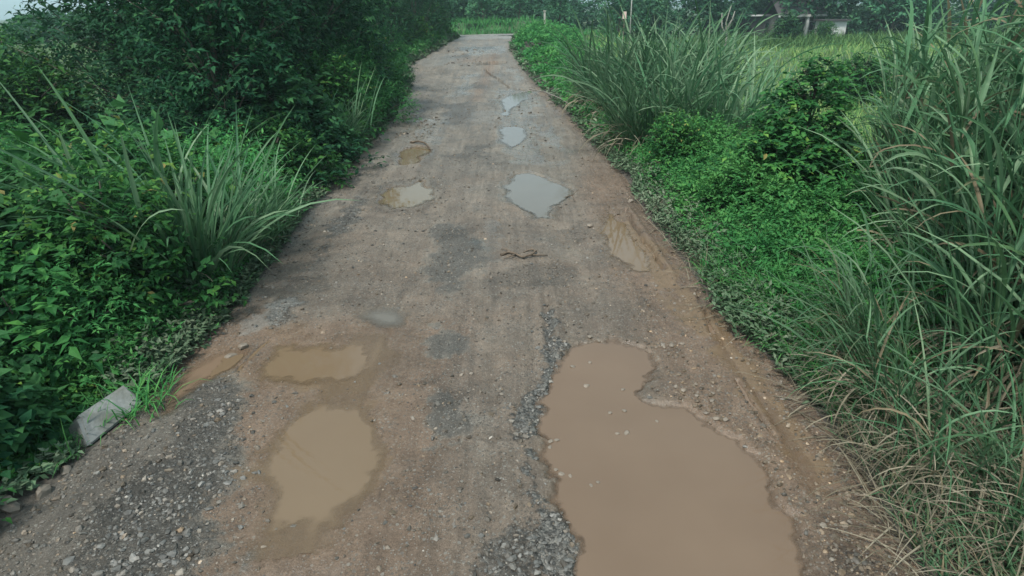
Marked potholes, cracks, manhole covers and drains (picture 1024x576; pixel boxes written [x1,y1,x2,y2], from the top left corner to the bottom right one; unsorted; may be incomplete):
pothole [495,126,531,149]
pothole [497,170,577,220]
pothole [374,179,439,210]
pothole [498,91,532,116]
pothole [595,209,658,274]
pothole [205,328,406,401]
pothole [212,388,427,564]
pothole [394,144,433,166]
pothole [526,333,825,576]
